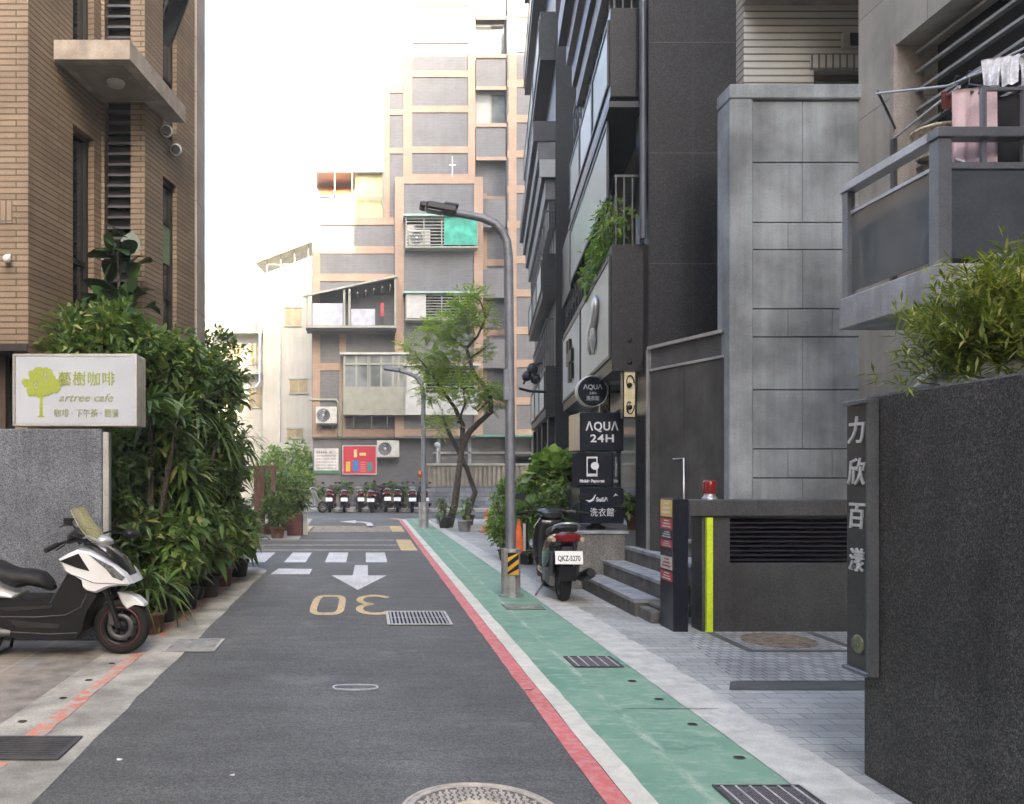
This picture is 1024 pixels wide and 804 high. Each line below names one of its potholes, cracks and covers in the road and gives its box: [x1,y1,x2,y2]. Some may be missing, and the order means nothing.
manhole cover [706,632,847,652]
drain grate [0,736,83,760]
drain grate [563,656,624,667]
manhole cover [402,782,554,804]
drain grate [712,784,826,804]
utility cover [162,639,225,651]
drain grate [386,611,453,625]
